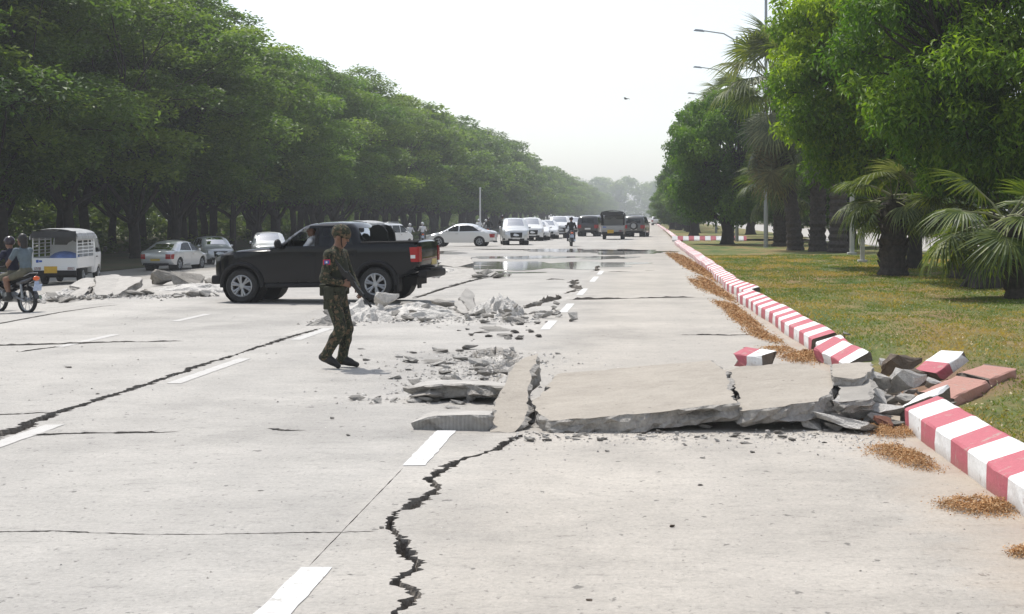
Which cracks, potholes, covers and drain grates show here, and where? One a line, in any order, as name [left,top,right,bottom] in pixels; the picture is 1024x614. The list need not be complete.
crack [0,434,523,614]
pothole [469,347,521,381]
crack [0,407,189,436]
crack [523,266,626,309]
crack [0,339,189,352]
